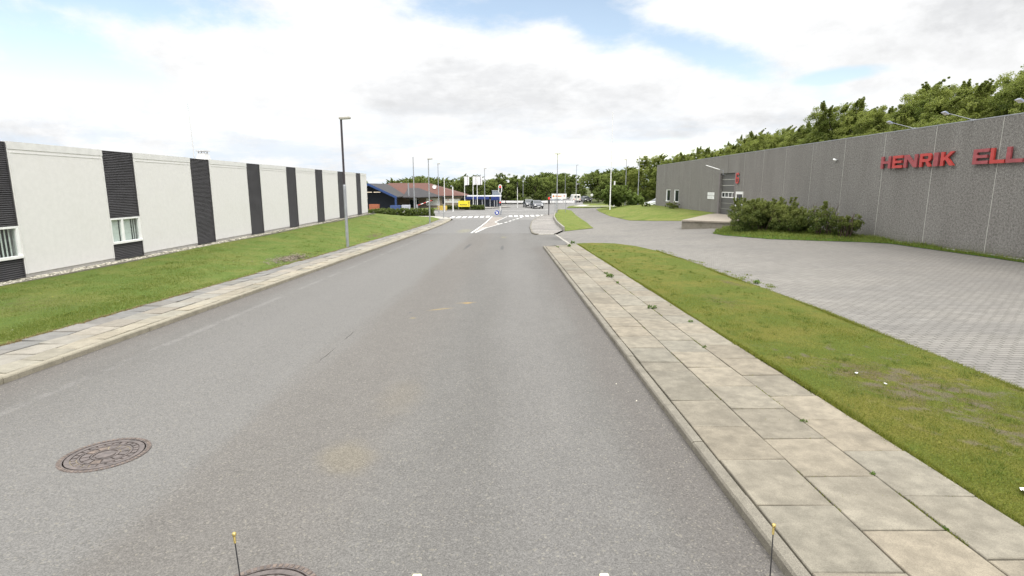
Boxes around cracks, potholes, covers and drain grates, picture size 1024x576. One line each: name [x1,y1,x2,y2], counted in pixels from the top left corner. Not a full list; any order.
manhole cover [55,437,152,473]
manhole cover [234,563,317,576]
